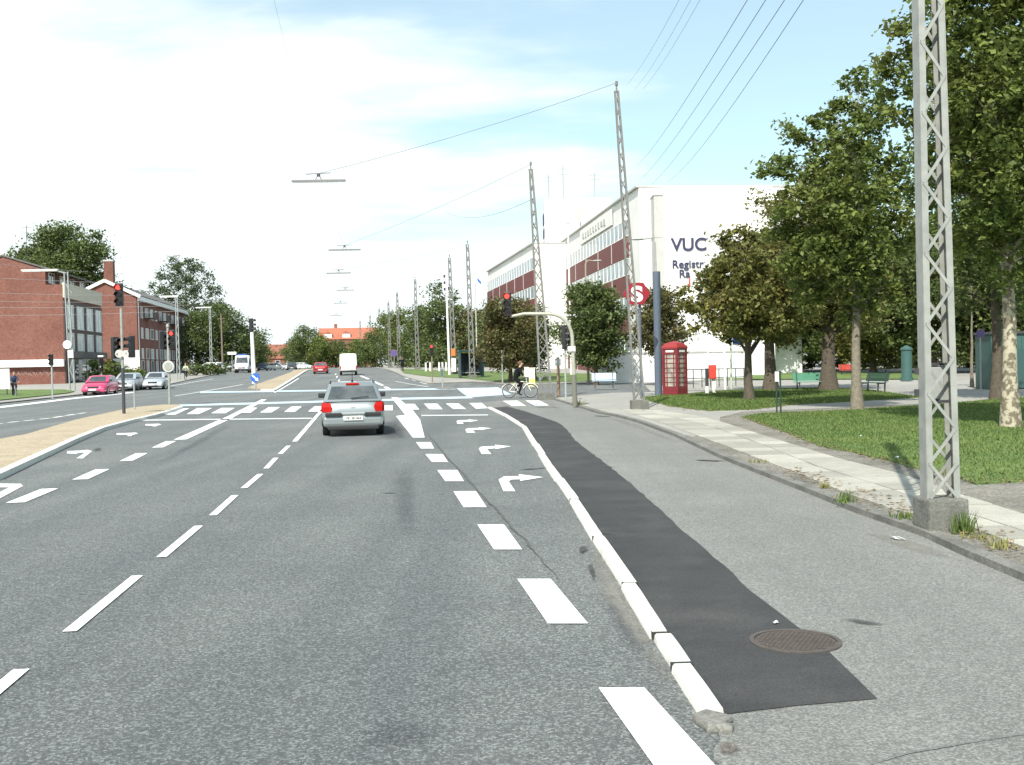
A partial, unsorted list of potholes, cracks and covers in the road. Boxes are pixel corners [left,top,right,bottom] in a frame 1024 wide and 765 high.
manhole cover [749,629,842,654]
crack [867,733,1024,765]
